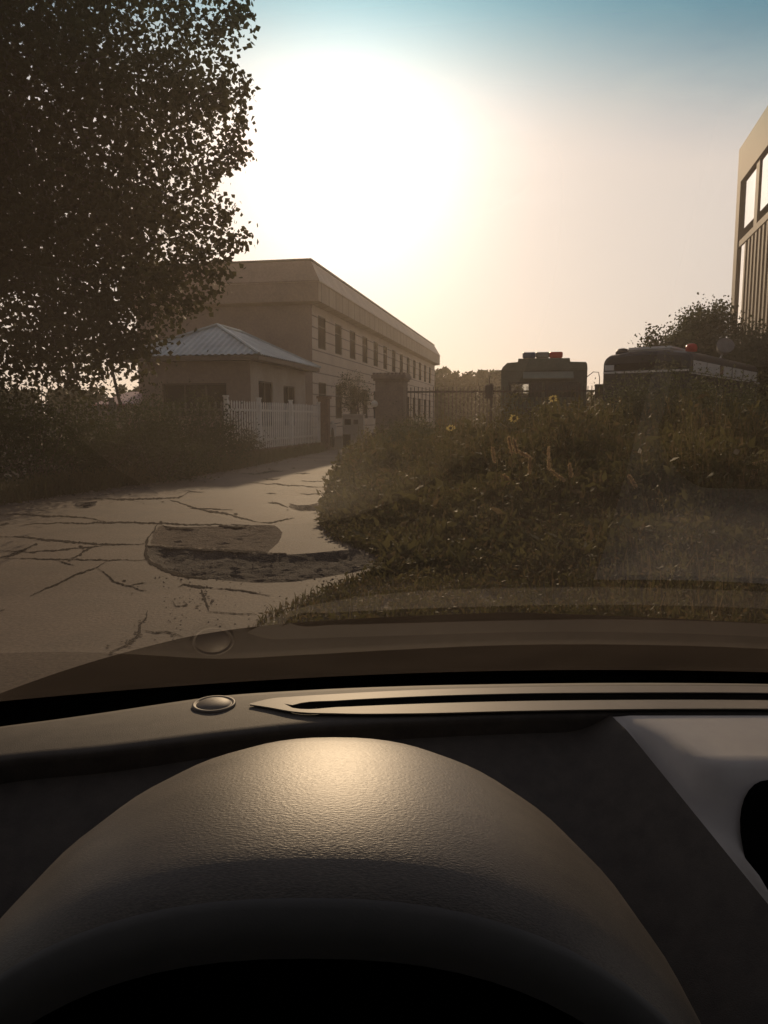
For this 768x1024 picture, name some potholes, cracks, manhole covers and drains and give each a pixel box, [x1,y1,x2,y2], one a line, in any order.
pothole [147,546,376,583]
pothole [151,525,283,552]
pothole [288,503,319,511]
crack [0,467,324,654]
pothole [73,501,97,509]
